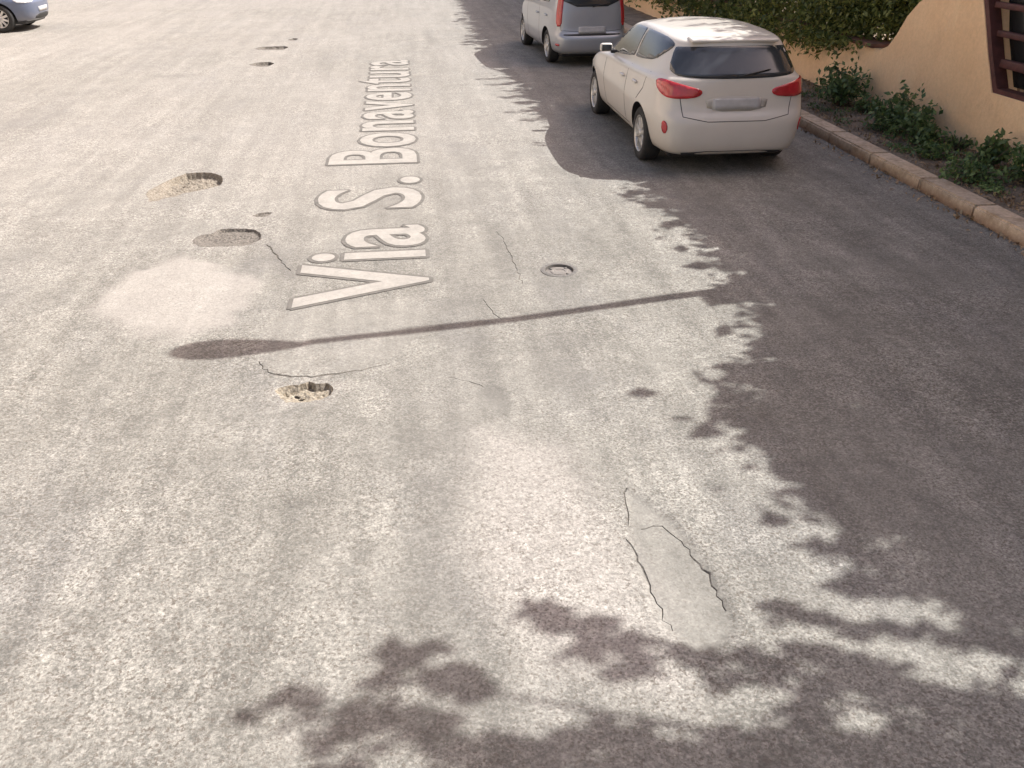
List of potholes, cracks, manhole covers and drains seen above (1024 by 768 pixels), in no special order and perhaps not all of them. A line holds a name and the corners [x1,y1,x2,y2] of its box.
manhole cover [541,263,578,277]
pothole [146,172,223,202]
pothole [192,229,262,247]
crack [497,232,523,284]
pothole [275,381,333,403]
crack [259,361,386,378]
crack [623,488,727,631]
